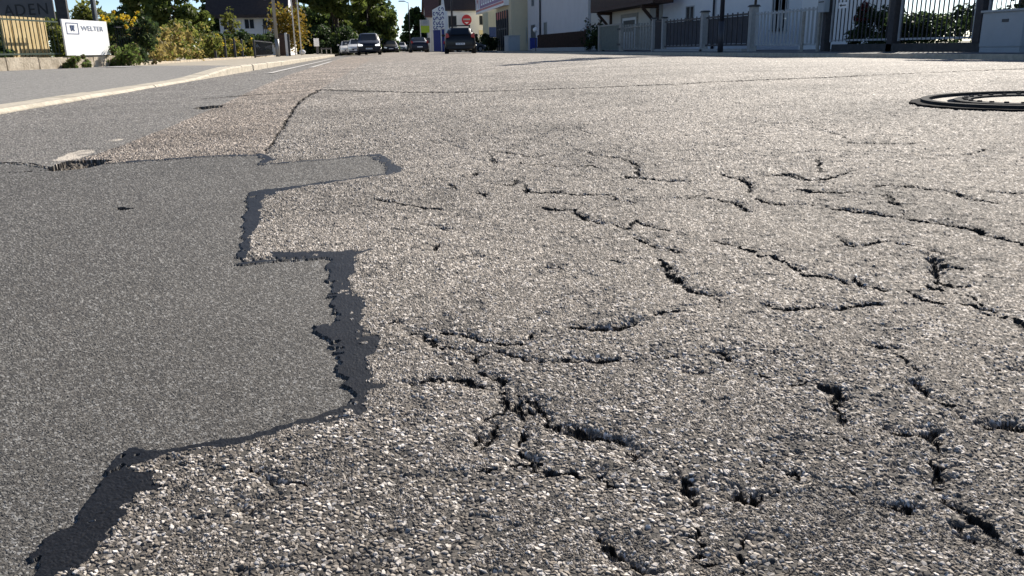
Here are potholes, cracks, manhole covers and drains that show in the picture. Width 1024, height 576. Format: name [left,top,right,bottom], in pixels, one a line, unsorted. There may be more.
pothole [3,159,111,173]
crack [377,129,1024,576]
manhole cover [909,90,1024,112]
